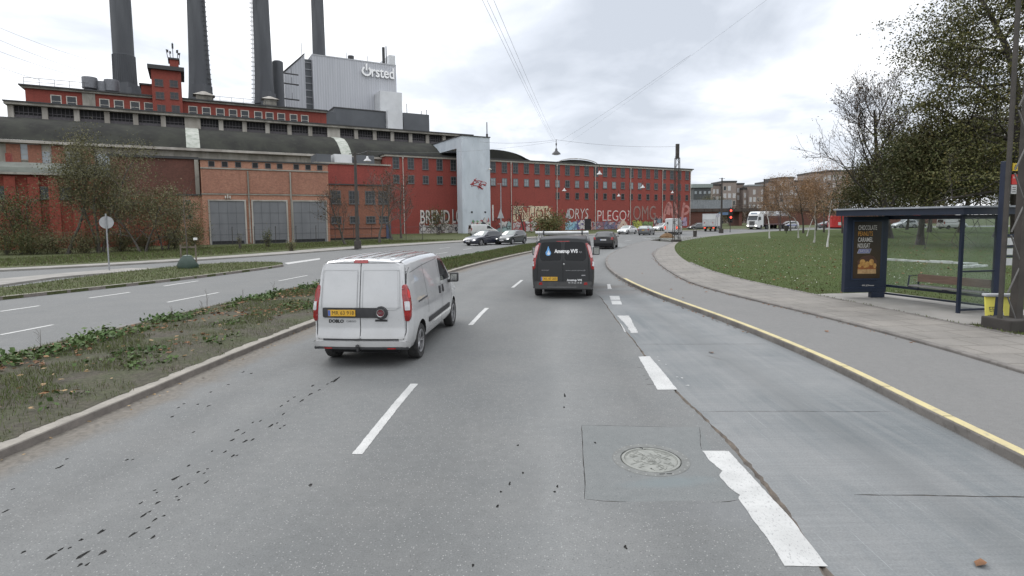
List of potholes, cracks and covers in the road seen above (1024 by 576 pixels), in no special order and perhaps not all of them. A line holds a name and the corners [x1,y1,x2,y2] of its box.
manhole cover [612,444,690,477]
